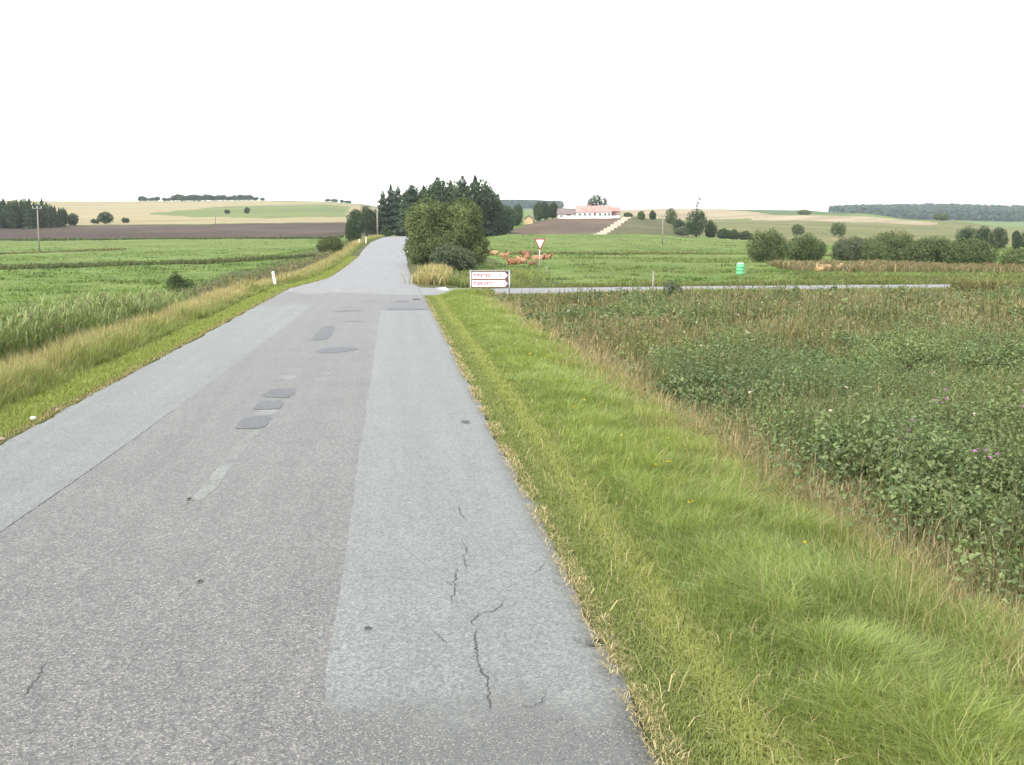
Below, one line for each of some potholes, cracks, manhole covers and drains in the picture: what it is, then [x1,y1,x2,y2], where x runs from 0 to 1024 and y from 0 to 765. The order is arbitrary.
crack [471,604,502,708]
